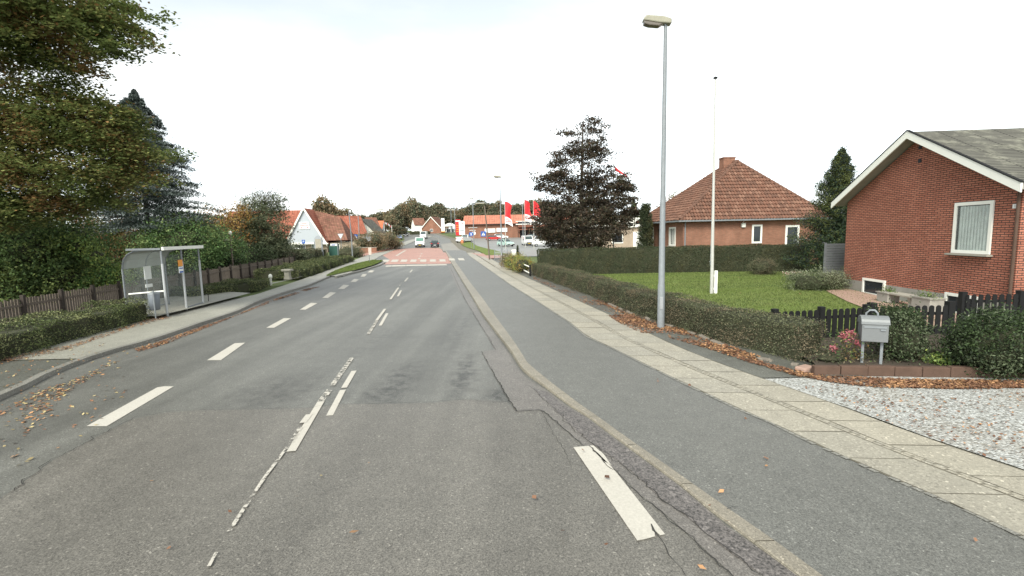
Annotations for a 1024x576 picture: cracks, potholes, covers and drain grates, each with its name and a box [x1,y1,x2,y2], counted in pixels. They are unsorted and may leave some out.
crack [481,351,733,576]
